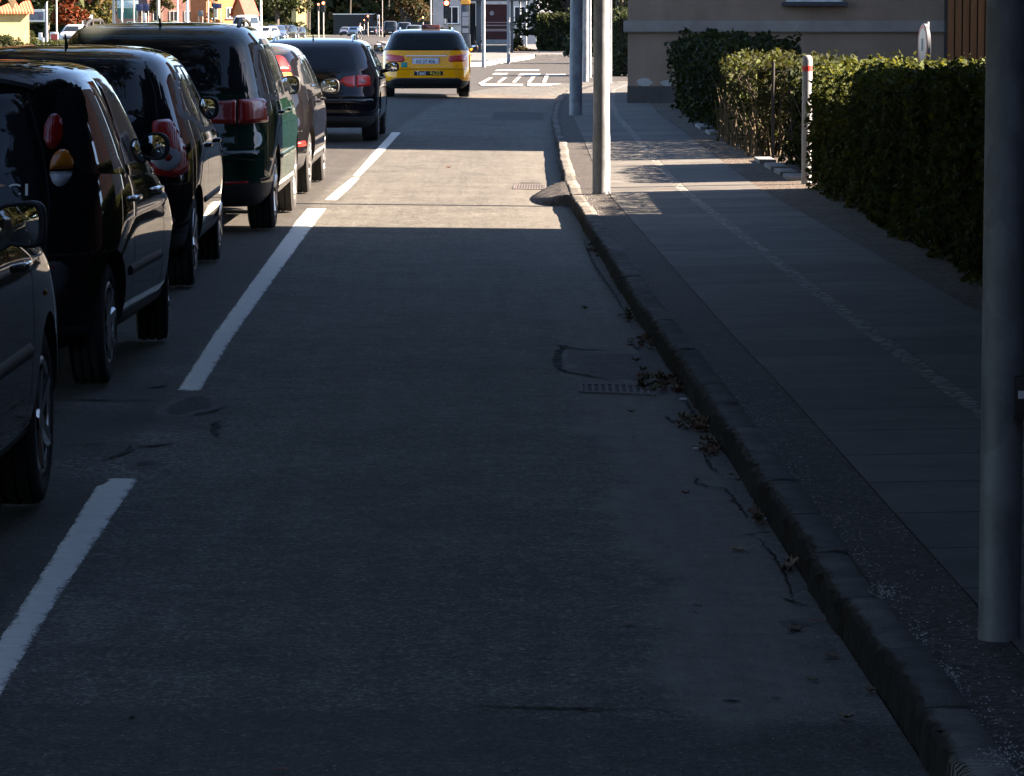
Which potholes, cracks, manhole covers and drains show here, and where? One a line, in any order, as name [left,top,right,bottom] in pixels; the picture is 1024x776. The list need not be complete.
drain grate [579,383,657,396]
crack [694,474,795,604]
